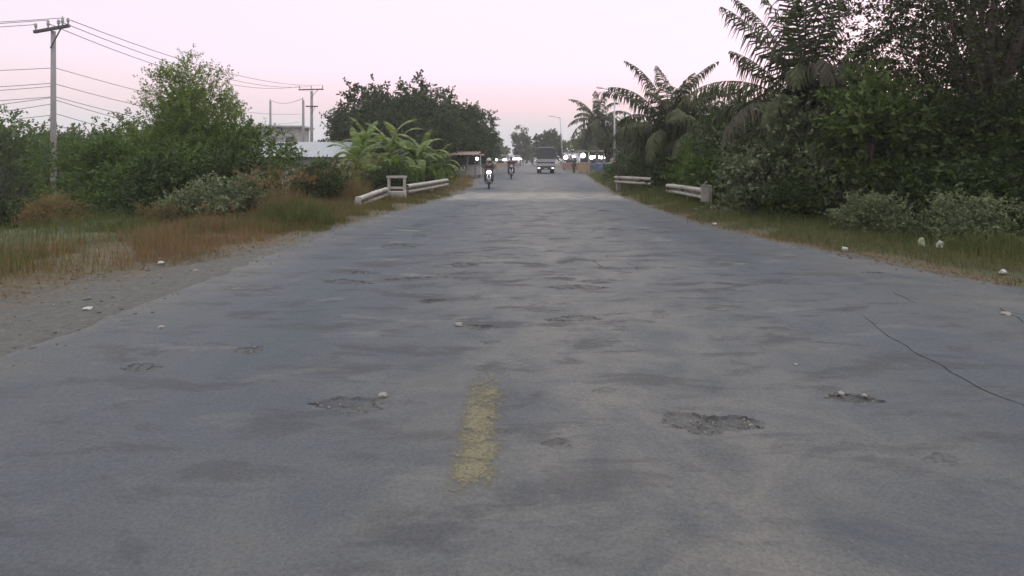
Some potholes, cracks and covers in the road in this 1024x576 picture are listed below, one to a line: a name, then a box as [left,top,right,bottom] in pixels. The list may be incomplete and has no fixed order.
pothole [921,452,961,464]
pothole [540,437,573,450]
pothole [823,392,887,405]
pothole [120,363,164,371]
pothole [307,396,385,414]
crack [863,316,1024,406]
pothole [659,412,766,436]
pothole [233,346,264,354]
crack [577,254,655,272]
